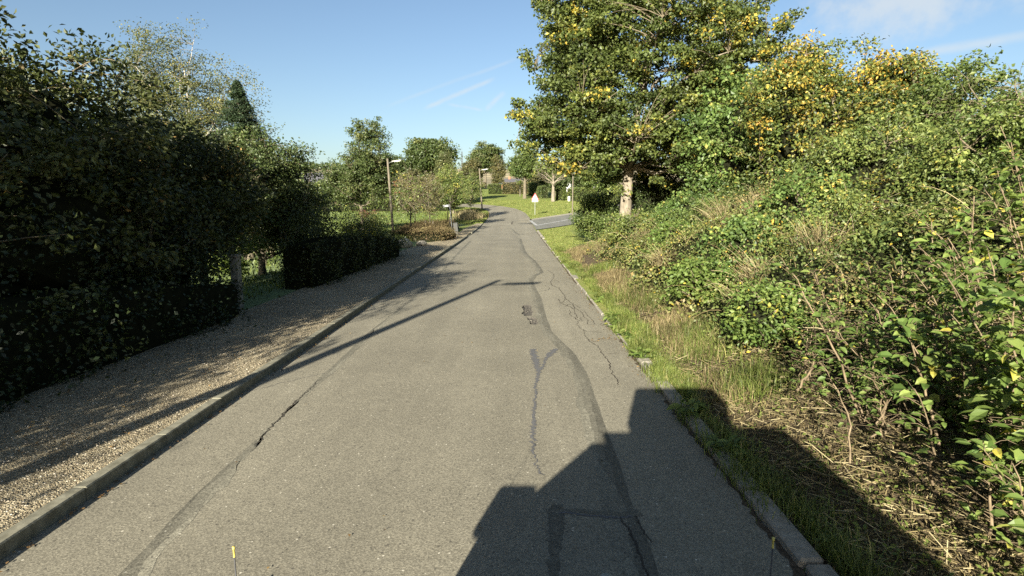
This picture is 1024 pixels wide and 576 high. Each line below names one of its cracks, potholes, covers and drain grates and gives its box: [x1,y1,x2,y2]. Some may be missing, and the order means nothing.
crack [544,270,619,385]
crack [252,375,317,444]
